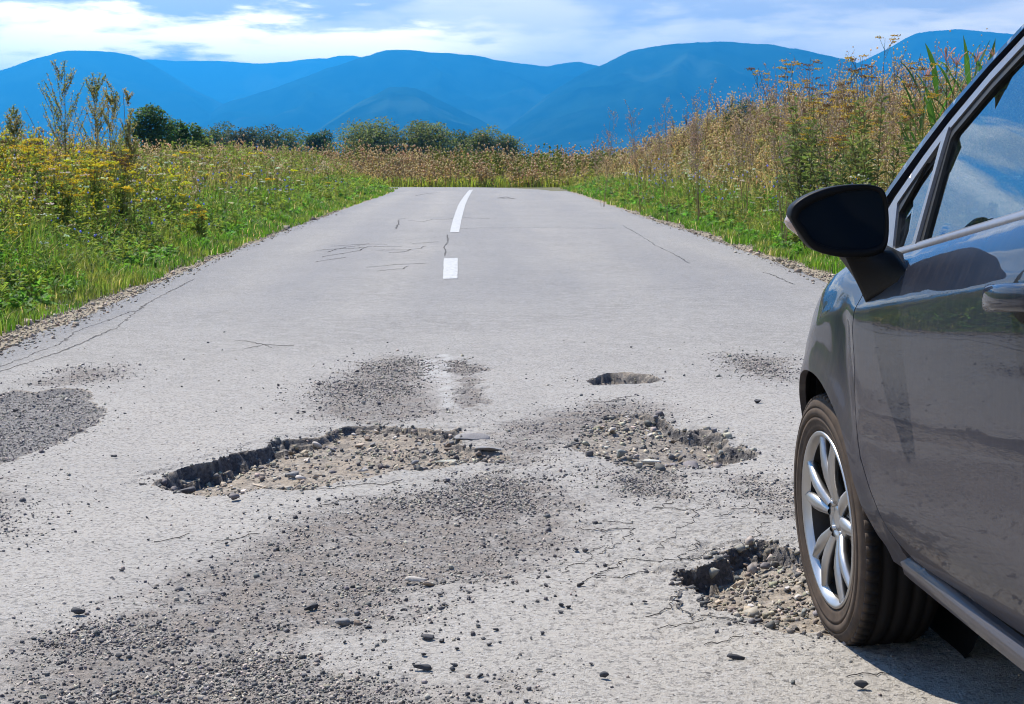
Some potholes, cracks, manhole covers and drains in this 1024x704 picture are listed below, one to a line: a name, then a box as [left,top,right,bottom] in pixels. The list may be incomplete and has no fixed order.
pothole [151,425,511,497]
crack [323,218,490,271]
pothole [570,413,759,472]
crack [0,280,192,371]
crack [562,502,768,645]
pothole [586,372,662,385]
pothole [673,540,838,640]
